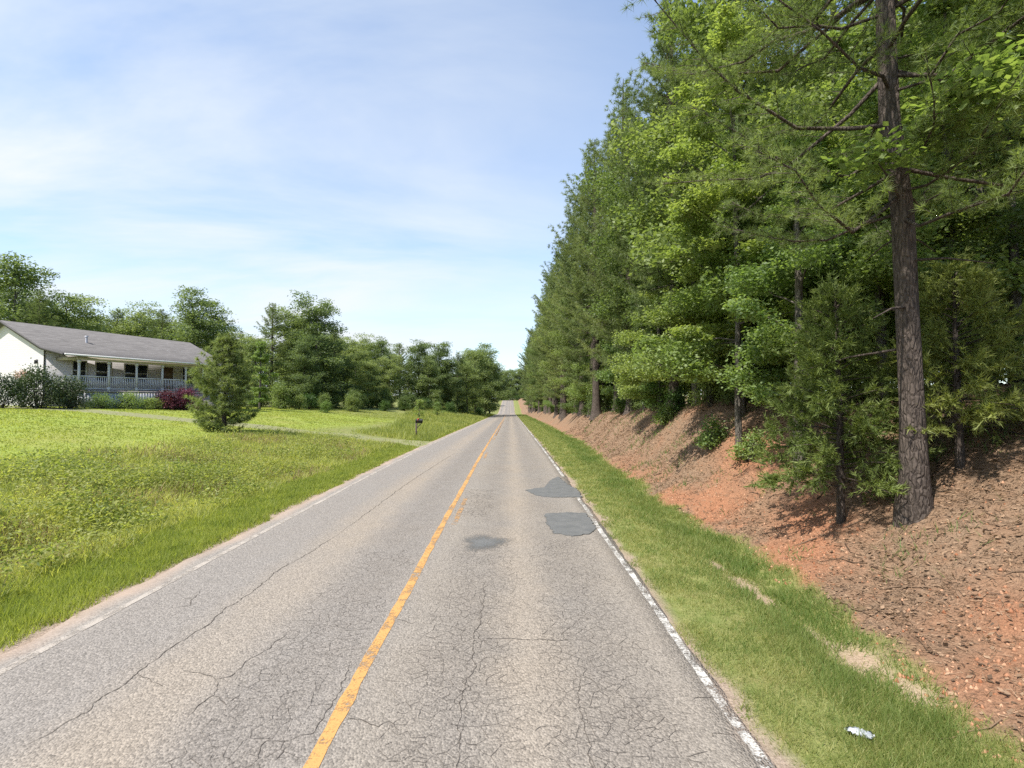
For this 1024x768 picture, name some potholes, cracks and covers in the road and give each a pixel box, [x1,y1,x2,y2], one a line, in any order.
crack [528,538,707,768]
crack [23,458,446,746]
crack [380,544,571,768]
